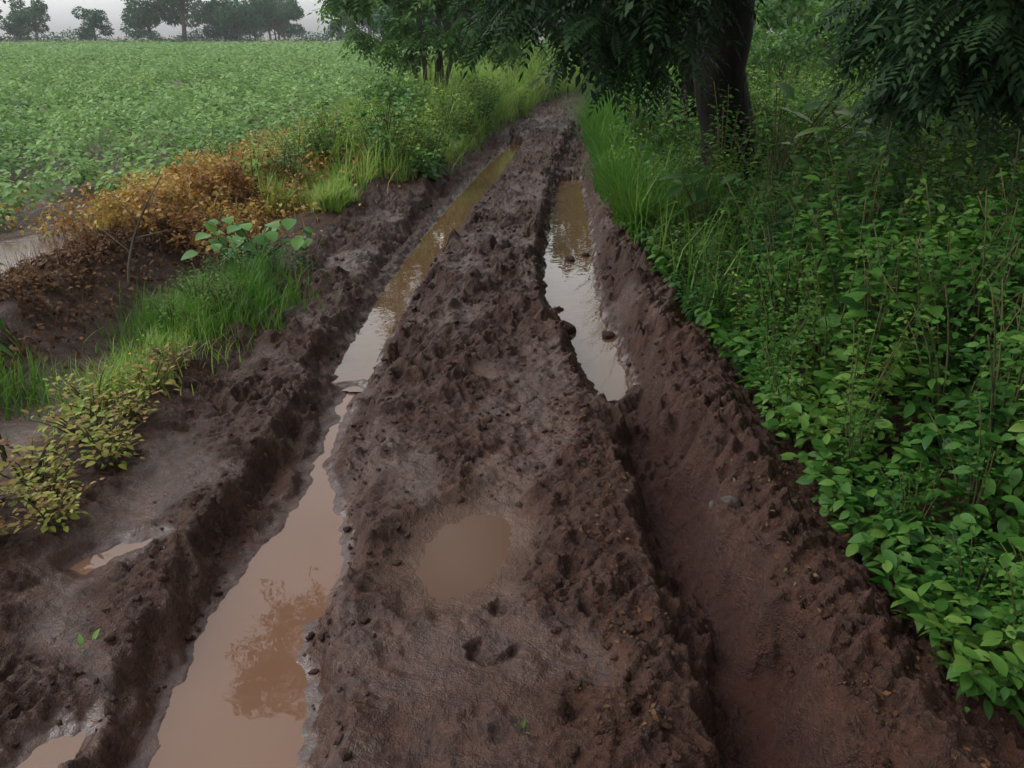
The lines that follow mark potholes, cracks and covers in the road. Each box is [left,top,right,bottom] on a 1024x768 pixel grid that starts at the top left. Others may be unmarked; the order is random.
pothole [56,527,171,578]
pothole [377,486,546,622]
